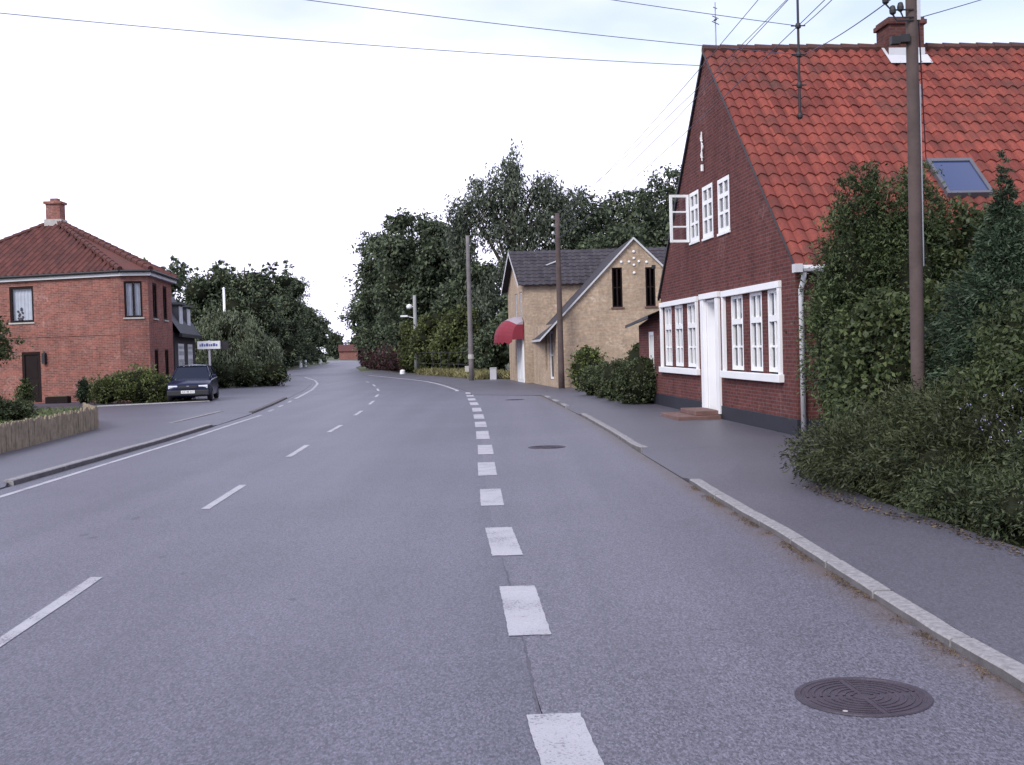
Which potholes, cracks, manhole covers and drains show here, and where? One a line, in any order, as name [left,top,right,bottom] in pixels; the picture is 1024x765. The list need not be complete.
manhole cover [794,677,934,717]
